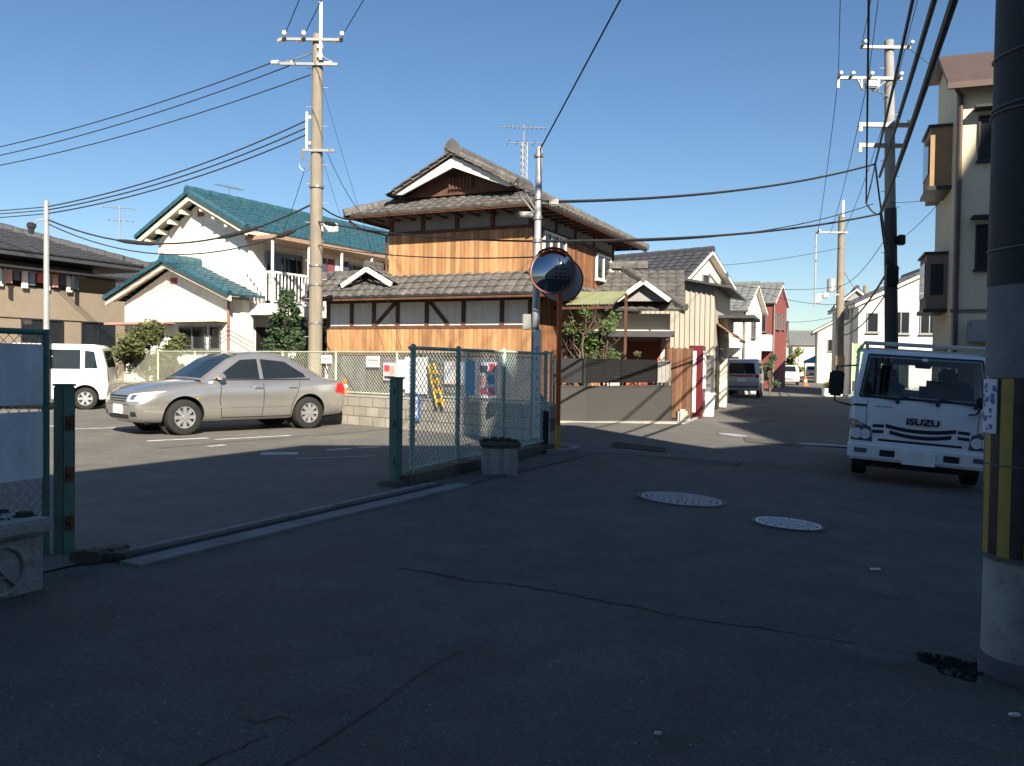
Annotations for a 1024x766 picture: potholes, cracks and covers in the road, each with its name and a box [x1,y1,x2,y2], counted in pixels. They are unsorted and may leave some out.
crack [402,568,800,634]
manhole cover [751,516,826,532]
crack [198,716,294,766]
manhole cover [637,491,727,508]
pothole [917,652,985,683]
